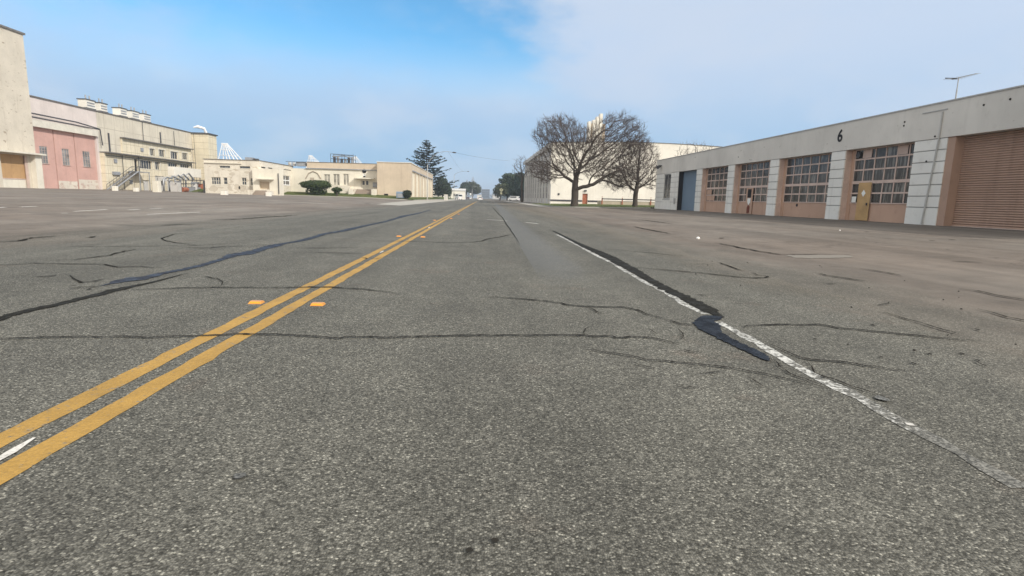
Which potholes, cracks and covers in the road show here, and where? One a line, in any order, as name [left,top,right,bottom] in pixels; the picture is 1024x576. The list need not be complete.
crack [612,249,769,278]
crack [10,297,911,398]
crack [743,302,969,340]
crack [4,224,233,288]
